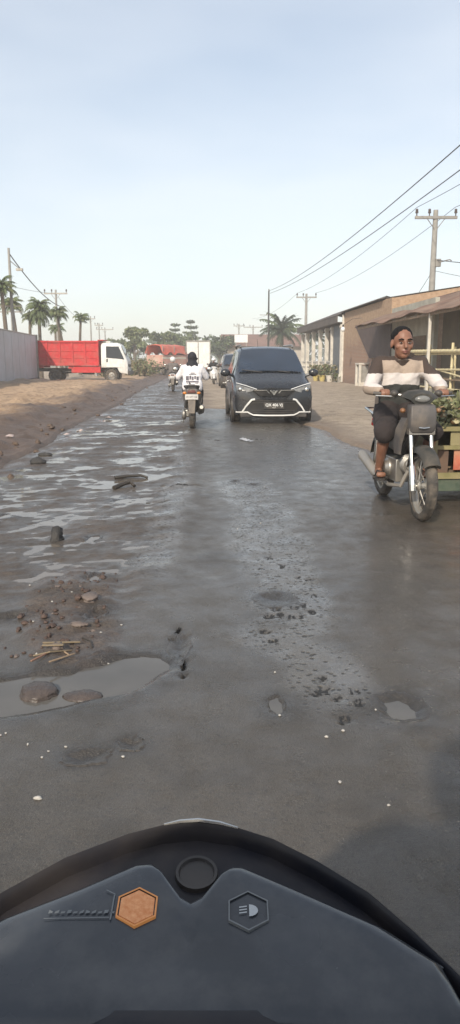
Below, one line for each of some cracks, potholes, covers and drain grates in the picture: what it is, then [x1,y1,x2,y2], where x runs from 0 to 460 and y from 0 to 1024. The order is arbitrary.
pothole [0,652,175,718]
pothole [58,745,116,767]
pothole [117,734,146,752]
pothole [251,590,300,610]
pothole [370,691,431,723]
pothole [266,693,287,715]
